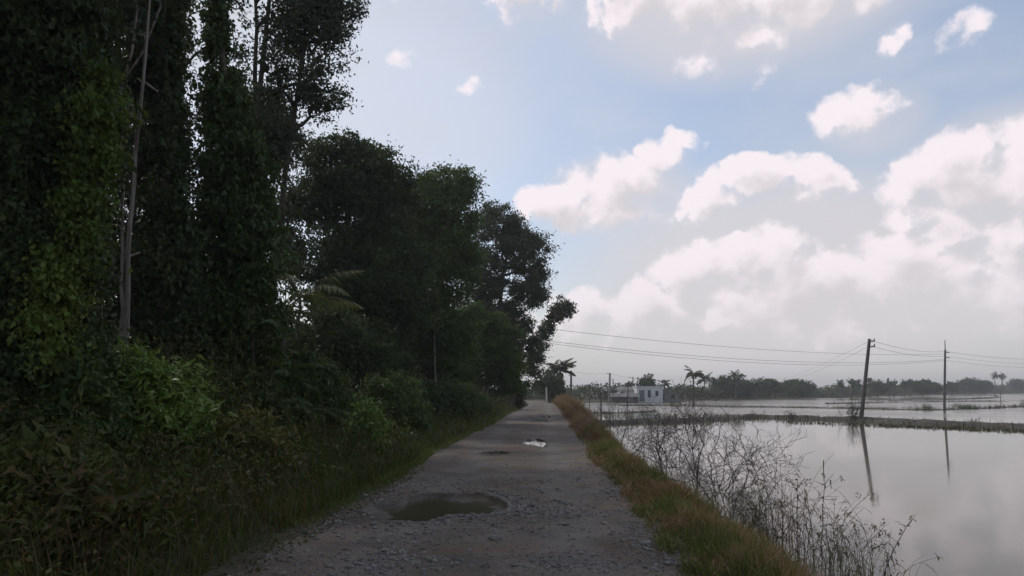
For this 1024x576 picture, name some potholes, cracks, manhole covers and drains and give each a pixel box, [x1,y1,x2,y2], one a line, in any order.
pothole [519,438,550,448]
pothole [337,489,536,529]
